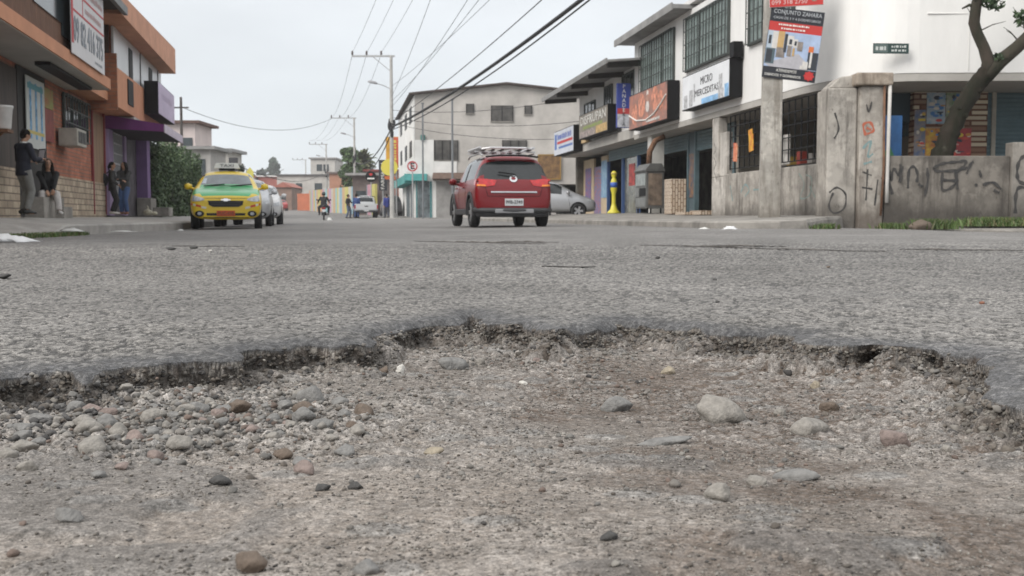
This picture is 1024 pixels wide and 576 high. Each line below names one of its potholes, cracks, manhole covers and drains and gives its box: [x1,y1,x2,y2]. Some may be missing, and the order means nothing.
pothole [0,314,1024,576]
